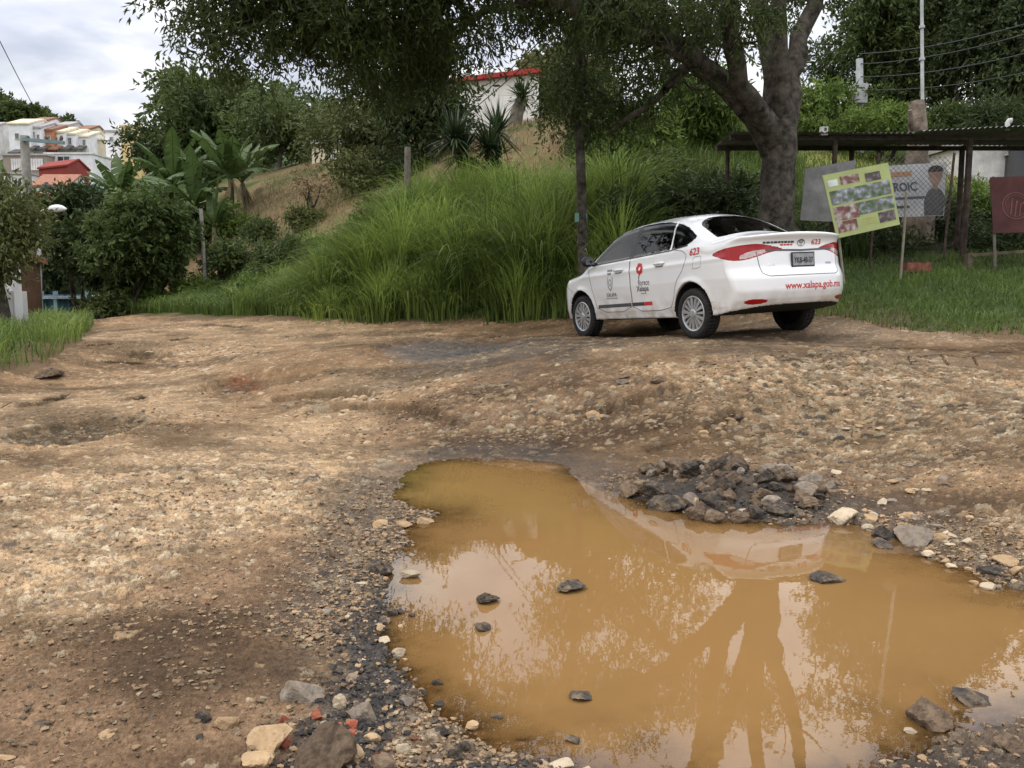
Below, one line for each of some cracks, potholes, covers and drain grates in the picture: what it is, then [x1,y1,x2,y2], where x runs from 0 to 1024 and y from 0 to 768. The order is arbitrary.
pothole [0,415,155,449]
pothole [312,448,1024,768]
pothole [185,364,329,394]
